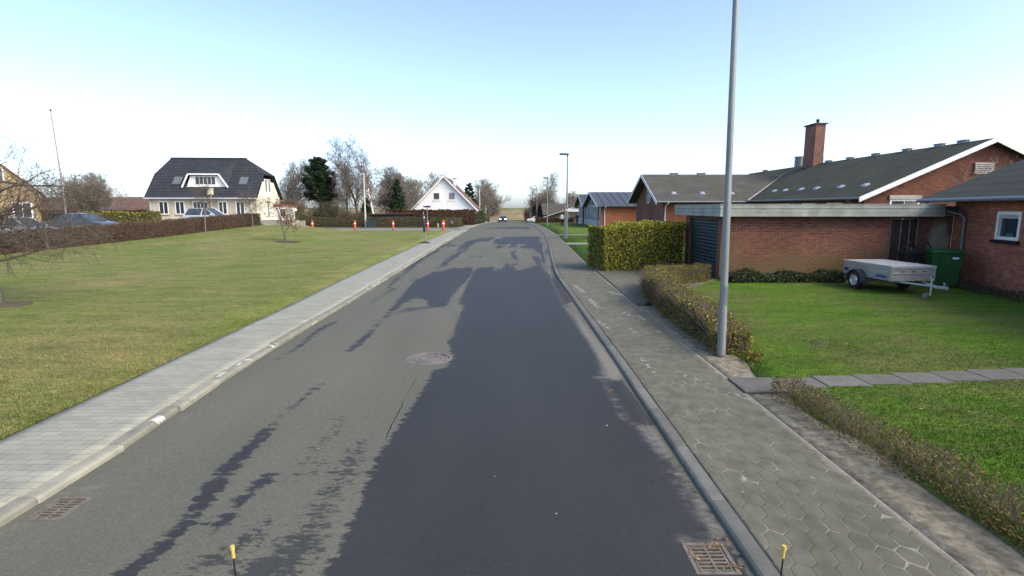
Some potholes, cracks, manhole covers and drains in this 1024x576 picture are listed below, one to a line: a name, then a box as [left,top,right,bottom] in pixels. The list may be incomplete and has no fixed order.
drain grate [681,543,742,575]
drain grate [24,497,93,520]
manhole cover [406,352,452,365]
